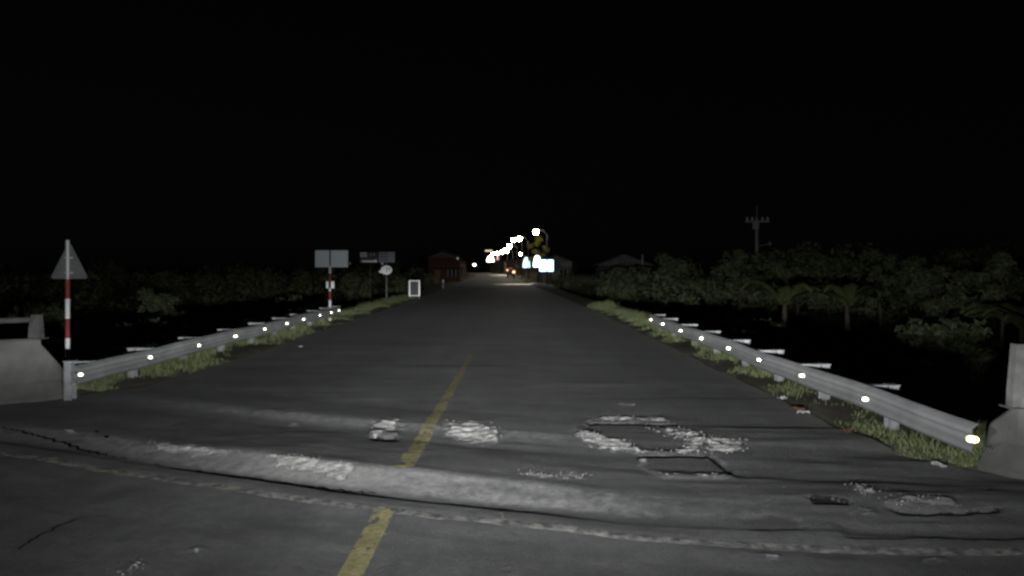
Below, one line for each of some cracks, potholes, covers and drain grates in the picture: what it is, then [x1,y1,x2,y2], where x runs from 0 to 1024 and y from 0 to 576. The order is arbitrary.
pothole [571,416,713,455]
pothole [366,429,399,442]
crack [3,426,125,459]
crack [19,518,79,551]
pothole [806,494,851,505]
pothole [882,495,1003,517]
